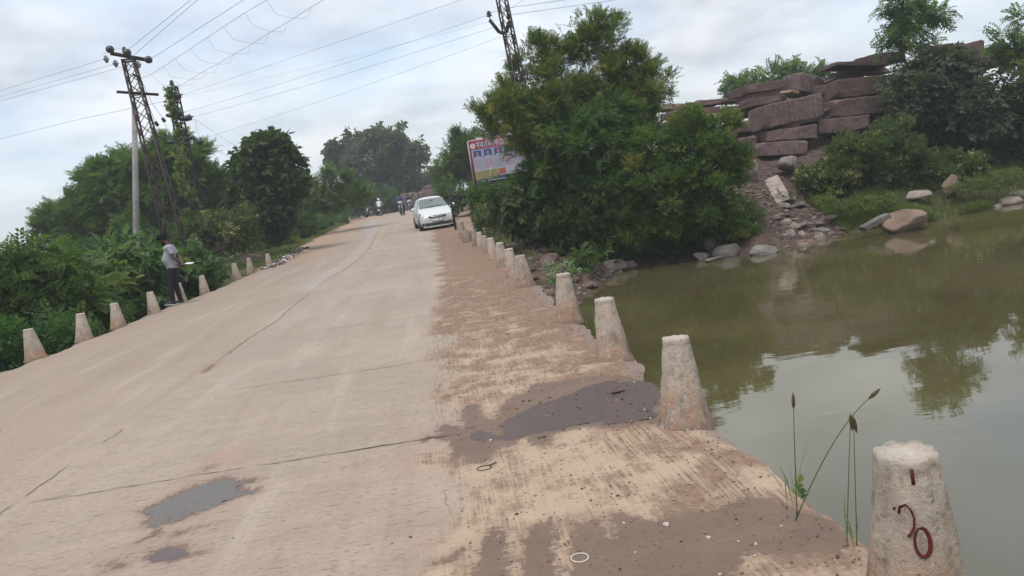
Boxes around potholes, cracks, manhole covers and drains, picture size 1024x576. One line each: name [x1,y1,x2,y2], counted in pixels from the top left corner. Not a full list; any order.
crack [0,428,250,513]
crack [218,226,381,361]
